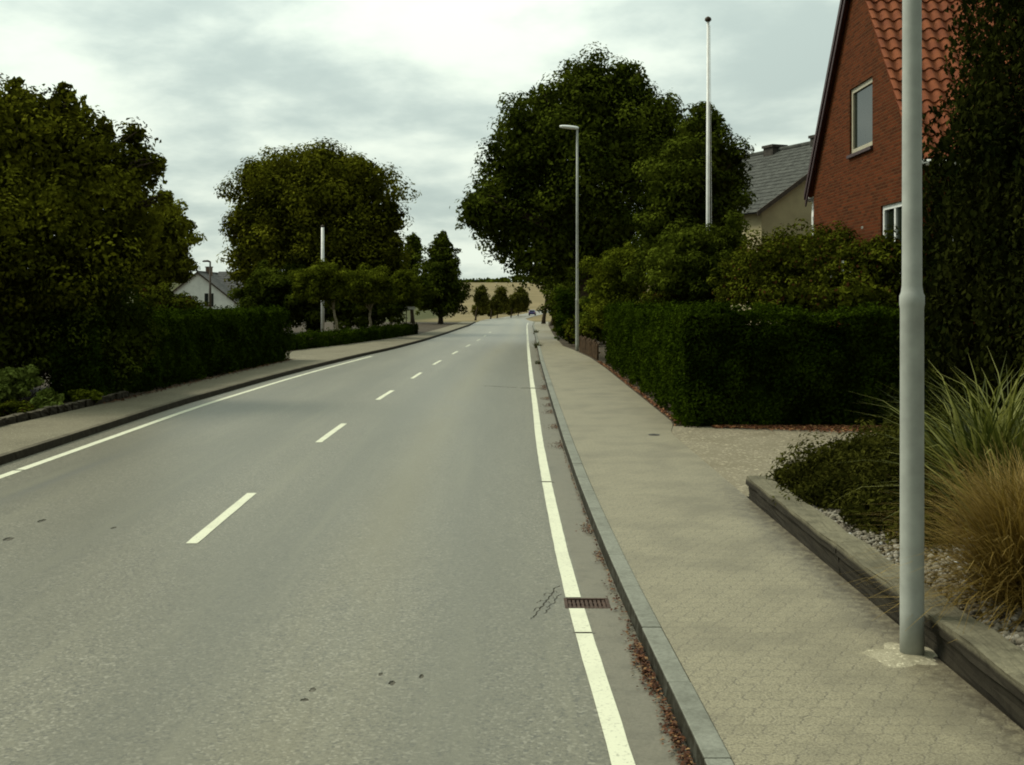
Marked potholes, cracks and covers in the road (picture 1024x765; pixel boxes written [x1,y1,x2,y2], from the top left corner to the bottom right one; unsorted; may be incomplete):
crack [531,585,561,619]
drain grate [564,598,611,608]
